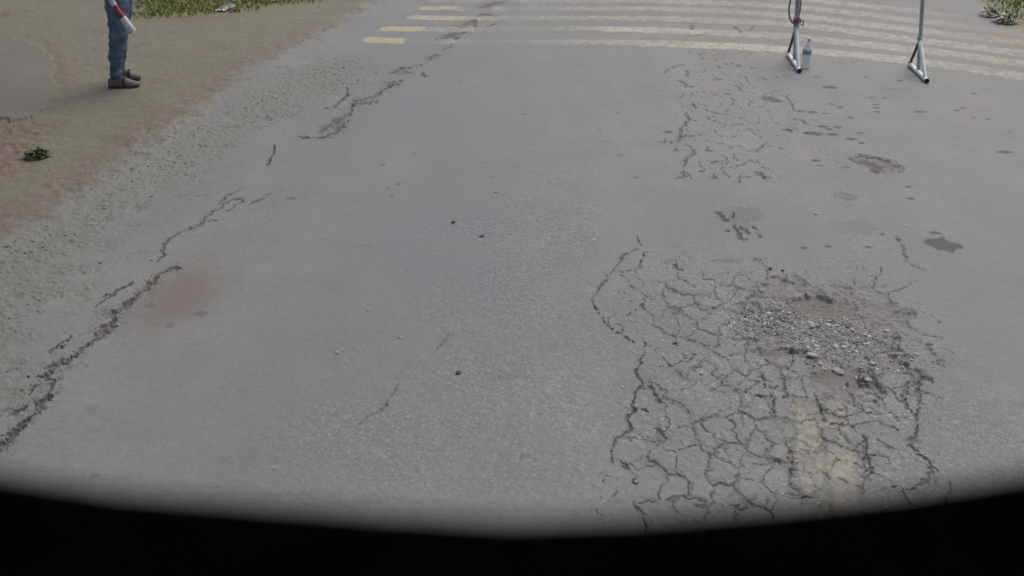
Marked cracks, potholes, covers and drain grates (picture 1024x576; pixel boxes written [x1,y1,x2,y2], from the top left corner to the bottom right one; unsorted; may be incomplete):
crack [591,236,954,517]
crack [297,0,508,140]
crack [353,382,400,427]
pothole [843,154,908,174]
crack [715,211,765,262]
crack [0,188,272,452]
pothole [714,273,944,409]
crack [660,24,809,183]
